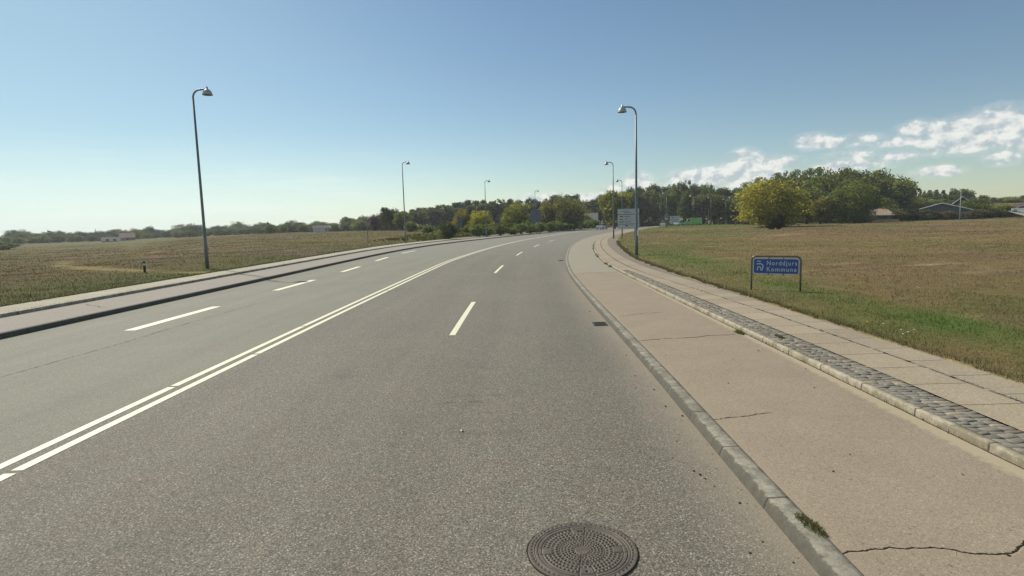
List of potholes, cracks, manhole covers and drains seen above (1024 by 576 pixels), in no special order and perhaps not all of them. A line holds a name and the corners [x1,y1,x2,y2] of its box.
crack [843,540,1024,564]
manhole cover [526,522,640,576]
